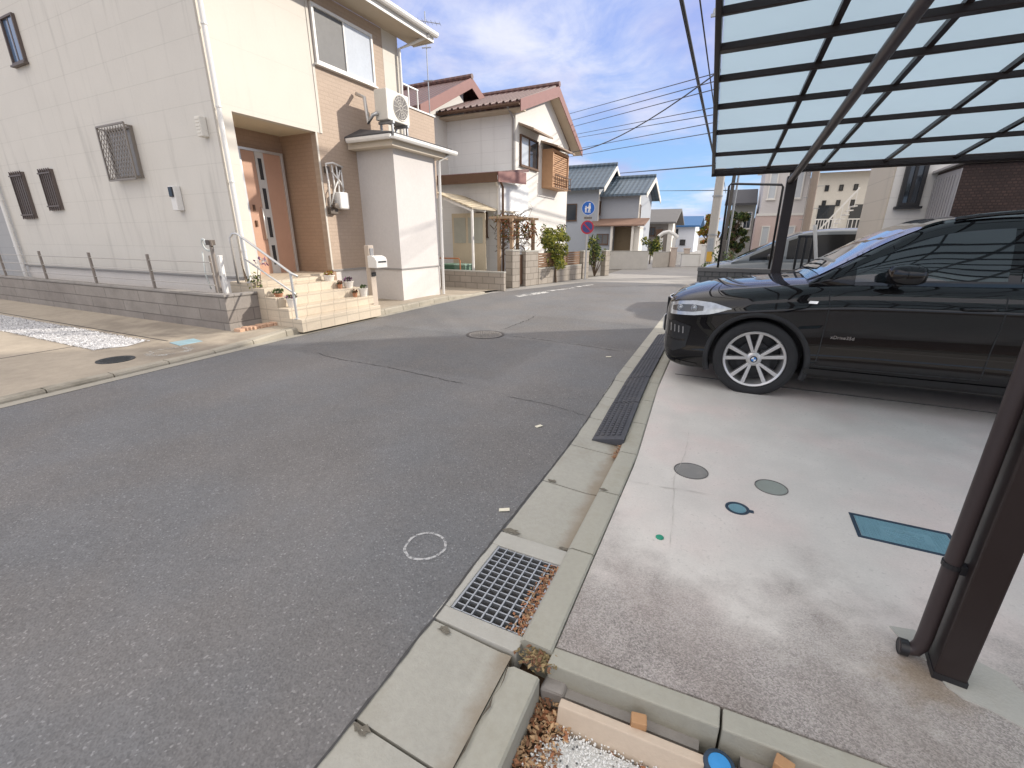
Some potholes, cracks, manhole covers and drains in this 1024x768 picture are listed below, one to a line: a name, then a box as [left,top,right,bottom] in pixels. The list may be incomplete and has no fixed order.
manhole cover [466,330,505,339]
utility cover [725,502,754,515]
manhole cover [95,355,136,364]
drain grate [433,532,567,669]
